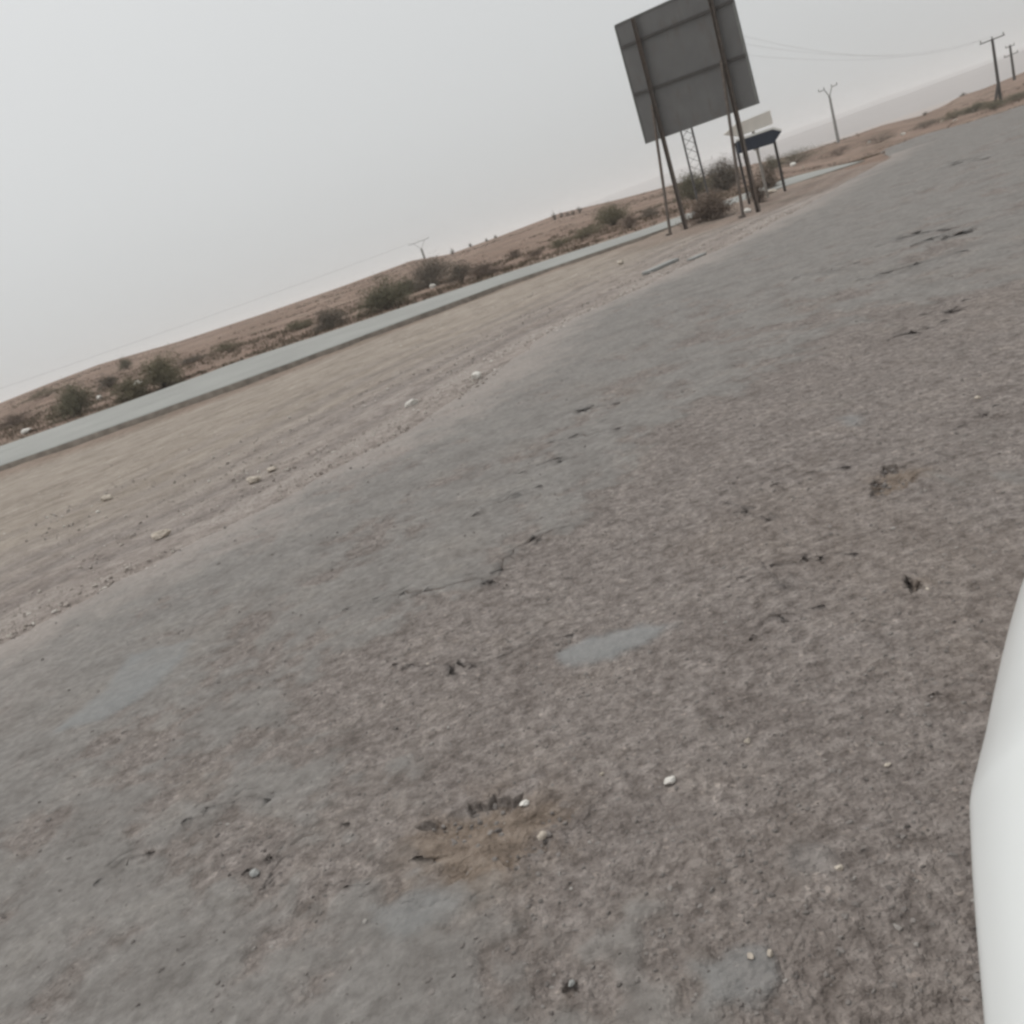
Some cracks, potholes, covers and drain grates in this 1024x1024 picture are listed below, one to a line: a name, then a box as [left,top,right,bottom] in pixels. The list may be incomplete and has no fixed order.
crack [339,399,623,677]
crack [788,224,979,340]
pothole [855,457,939,504]
pothole [891,571,942,603]
pothole [385,783,595,909]
